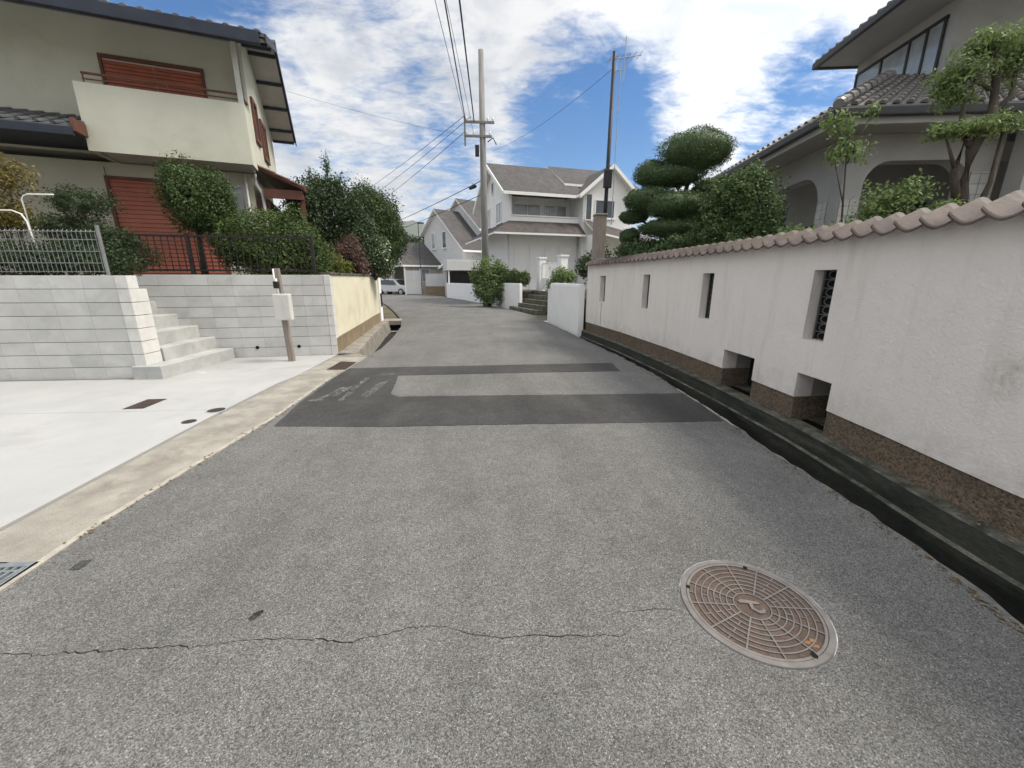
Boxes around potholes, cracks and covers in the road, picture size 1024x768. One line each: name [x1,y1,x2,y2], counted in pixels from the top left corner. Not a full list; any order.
manhole cover [680,560,837,670]
crack [0,608,684,657]
drain grate [0,561,39,587]
